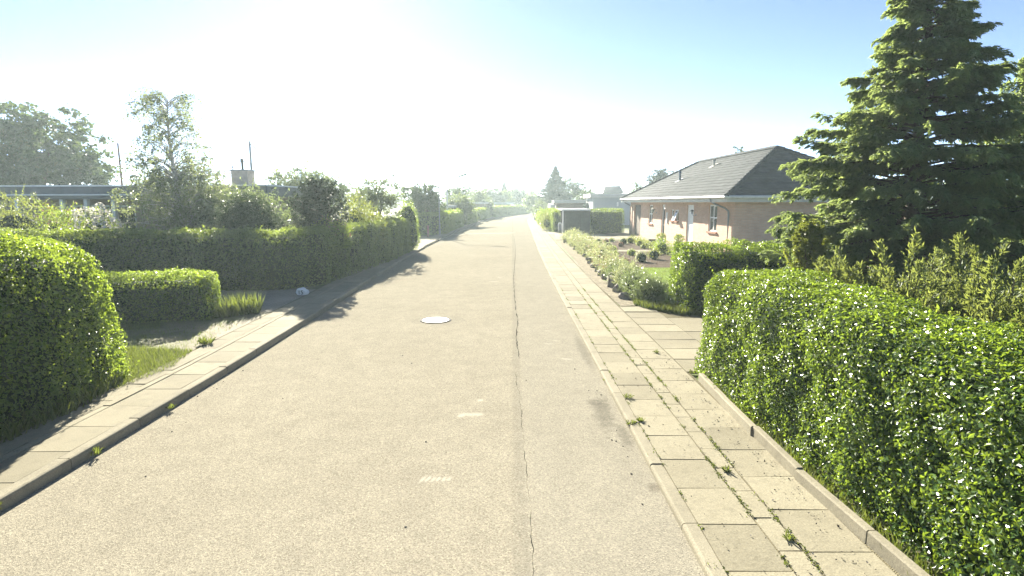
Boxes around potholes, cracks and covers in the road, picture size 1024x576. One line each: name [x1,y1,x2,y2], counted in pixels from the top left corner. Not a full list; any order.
crack [516,377,534,574]
